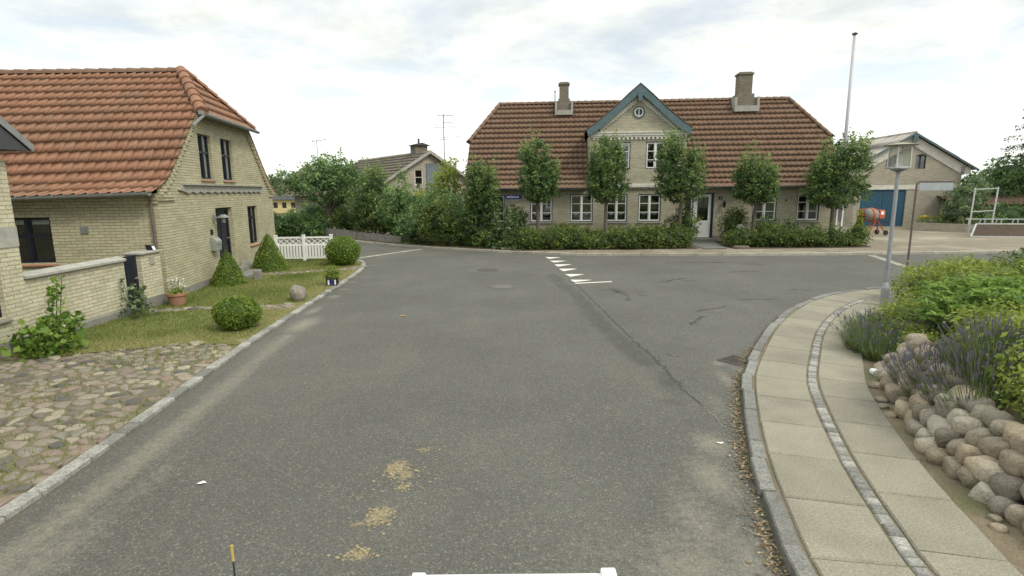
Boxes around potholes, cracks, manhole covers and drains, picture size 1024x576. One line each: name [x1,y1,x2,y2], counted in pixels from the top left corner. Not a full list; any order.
drain grate [717,355,748,366]
crack [576,262,766,429]
